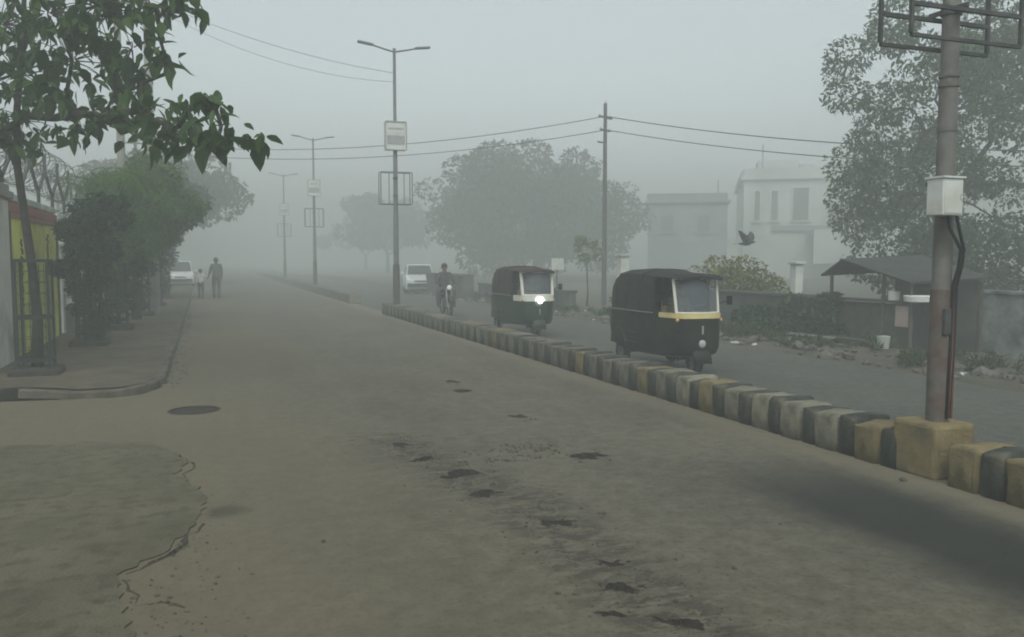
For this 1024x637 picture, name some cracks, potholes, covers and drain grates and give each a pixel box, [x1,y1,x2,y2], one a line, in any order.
crack [122,523,206,608]
pothole [440,469,483,479]
pothole [592,610,627,618]
pothole [541,519,577,527]
pothole [600,582,640,594]
pothole [651,615,706,631]
pothole [467,489,504,498]
crack [173,452,196,477]
pothole [597,559,625,567]
pothole [569,452,609,460]
manhole cover [167,405,221,415]
